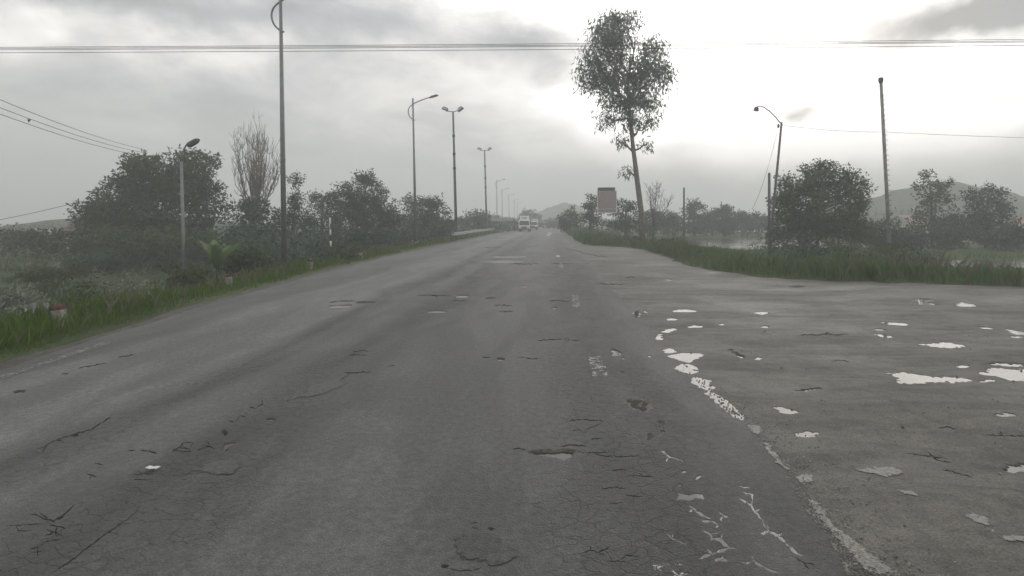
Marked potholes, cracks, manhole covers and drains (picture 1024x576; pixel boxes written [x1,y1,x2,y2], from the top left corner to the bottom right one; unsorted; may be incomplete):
pothole [624,396,653,412]
crack [907,452,973,478]
crack [9,505,138,575]
crack [583,546,638,563]
crack [129,442,214,454]
pothole [525,448,577,460]
crack [531,419,682,504]
